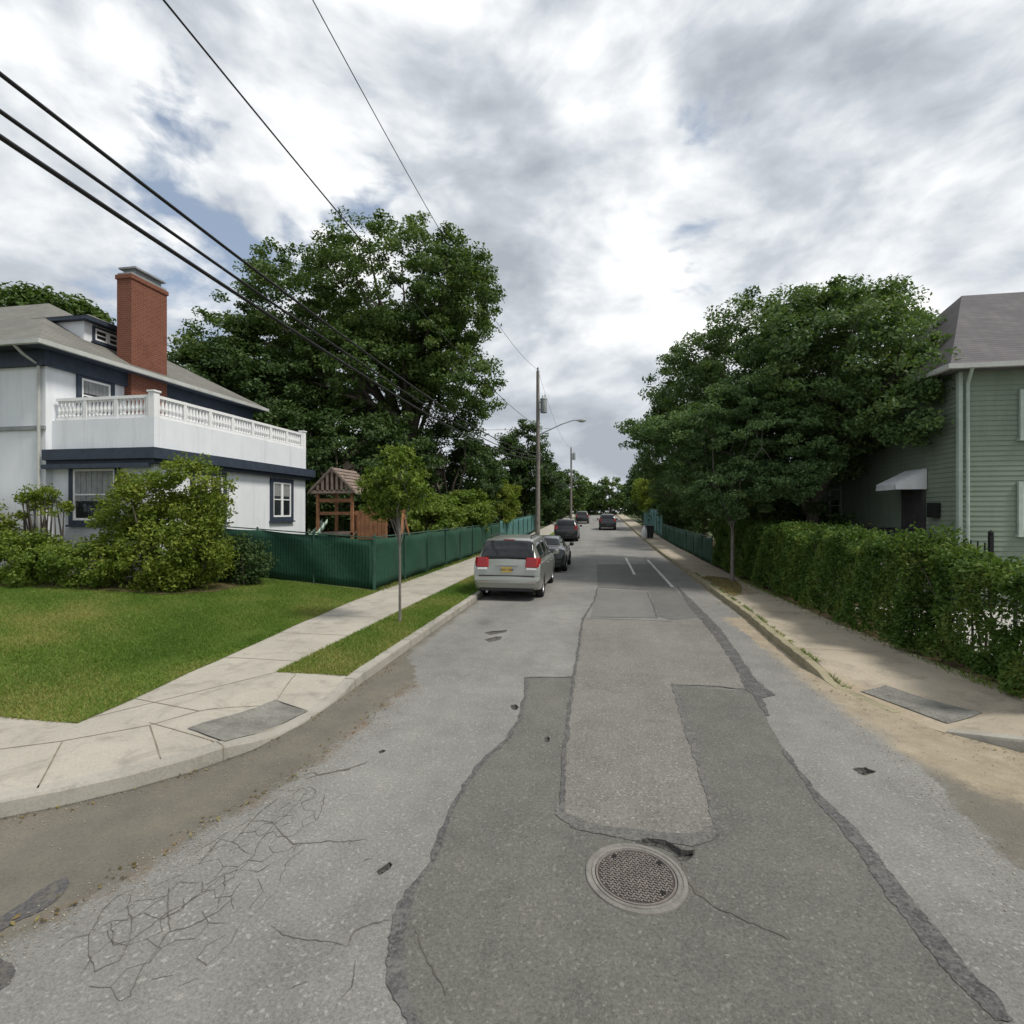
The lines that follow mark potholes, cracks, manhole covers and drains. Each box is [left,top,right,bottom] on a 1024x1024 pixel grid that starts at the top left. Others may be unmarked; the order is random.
crack [59,787,370,1001]
pothole [853,767,876,776]
pothole [635,838,696,861]
manhole cover [585,843,689,916]
crack [681,859,788,939]
